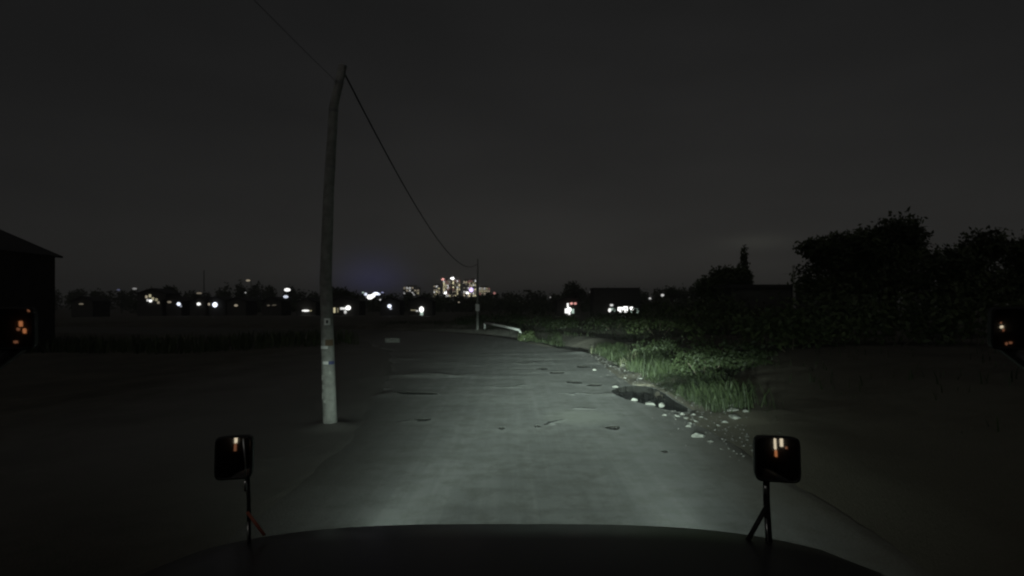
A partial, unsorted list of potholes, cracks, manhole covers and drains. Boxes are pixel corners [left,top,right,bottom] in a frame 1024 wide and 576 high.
pothole [607,385,693,414]
